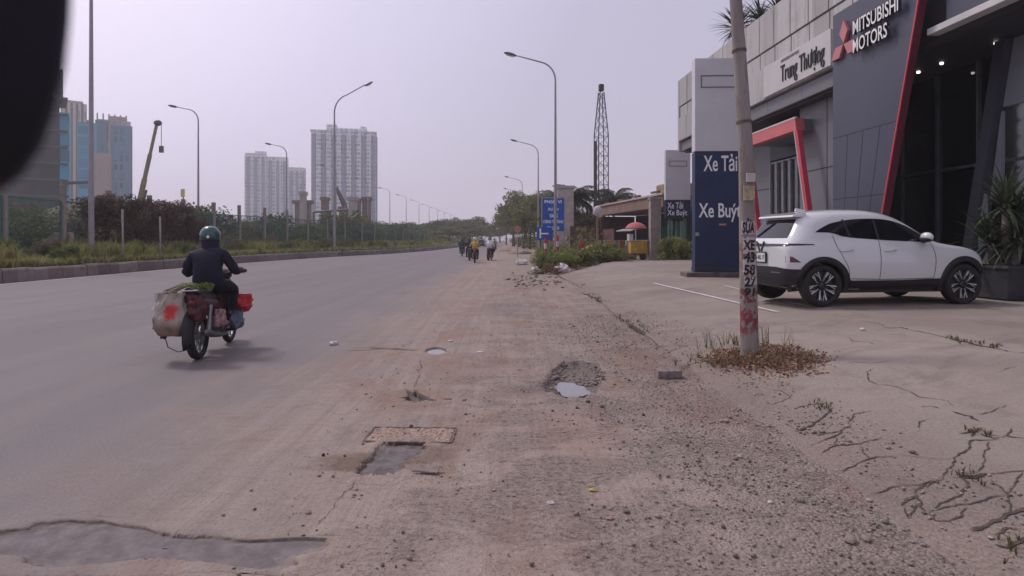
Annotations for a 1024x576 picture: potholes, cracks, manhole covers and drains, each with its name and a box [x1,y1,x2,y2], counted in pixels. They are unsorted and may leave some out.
manhole cover [362,426,457,445]
crack [557,274,710,368]
crack [350,347,421,387]
pothole [337,434,446,485]
crack [847,336,951,429]
pothole [386,387,450,408]
crack [776,390,1024,549]
pothole [529,359,622,403]
